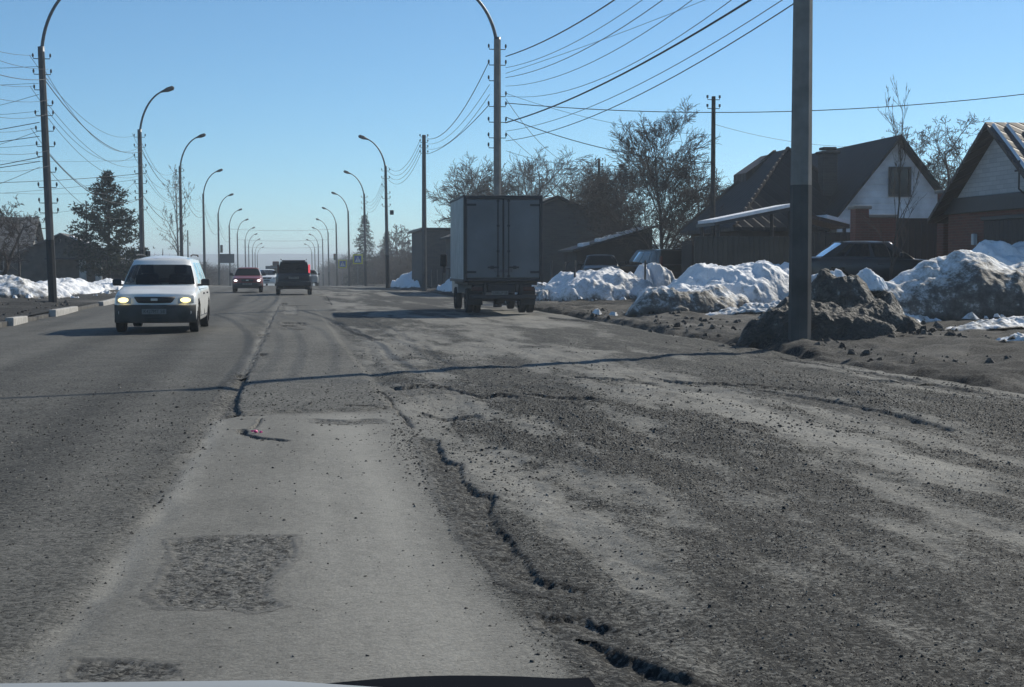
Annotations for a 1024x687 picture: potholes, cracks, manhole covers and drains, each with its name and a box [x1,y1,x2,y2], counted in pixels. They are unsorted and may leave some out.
crack [230,412,293,442]
